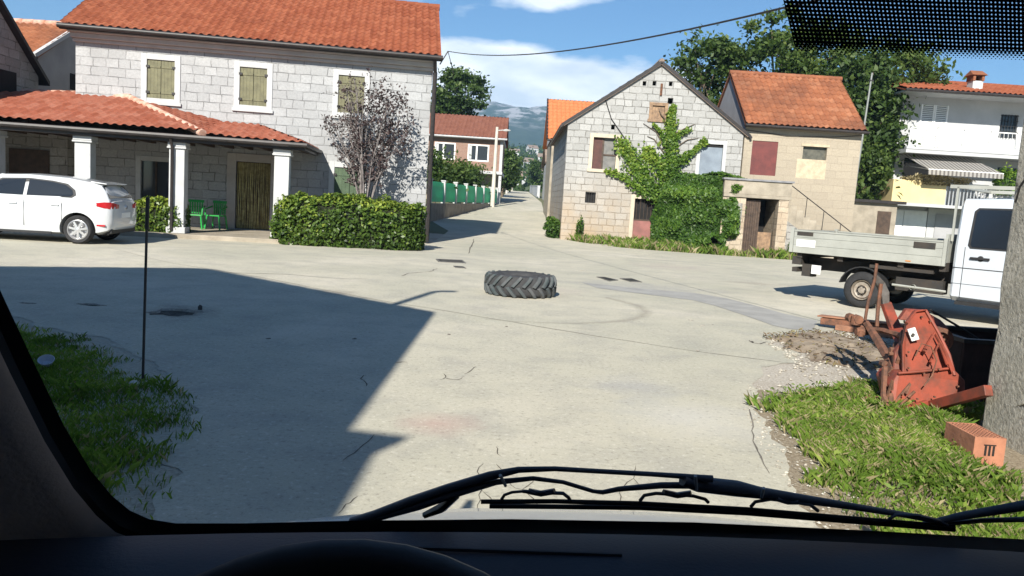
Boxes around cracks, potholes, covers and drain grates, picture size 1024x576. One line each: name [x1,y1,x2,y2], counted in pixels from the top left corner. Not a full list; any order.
crack [749,409,769,472]
pothole [146,308,205,317]
